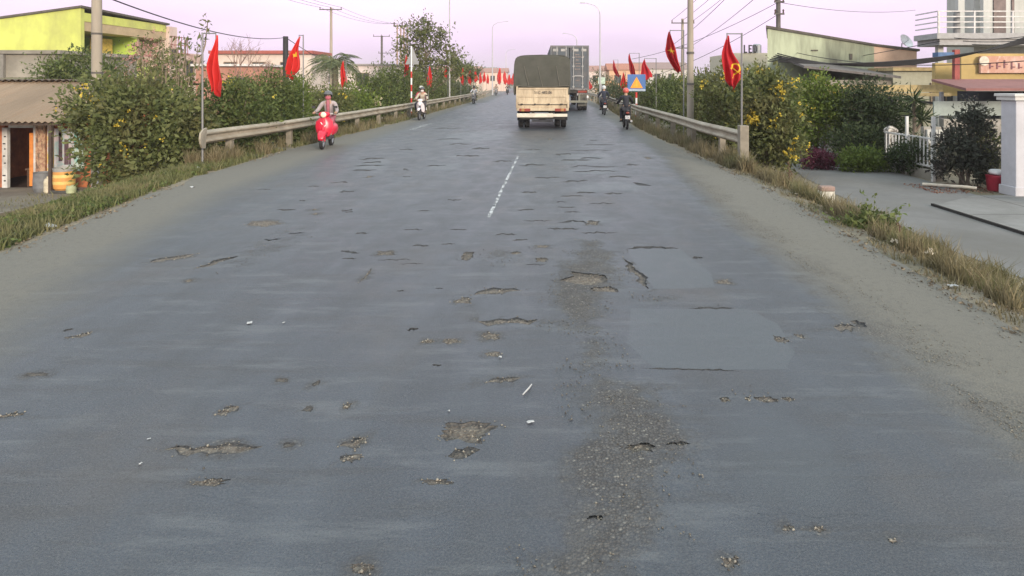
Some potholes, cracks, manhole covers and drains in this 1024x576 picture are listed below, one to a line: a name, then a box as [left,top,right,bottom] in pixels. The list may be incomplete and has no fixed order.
pothole [833,324,856,332]
pothole [340,437,367,449]
pothole [165,443,262,456]
pothole [448,447,480,459]
pothole [190,478,227,487]
pothole [561,272,607,285]
pothole [217,405,239,416]
pothole [479,317,537,327]
pothole [440,421,498,444]
